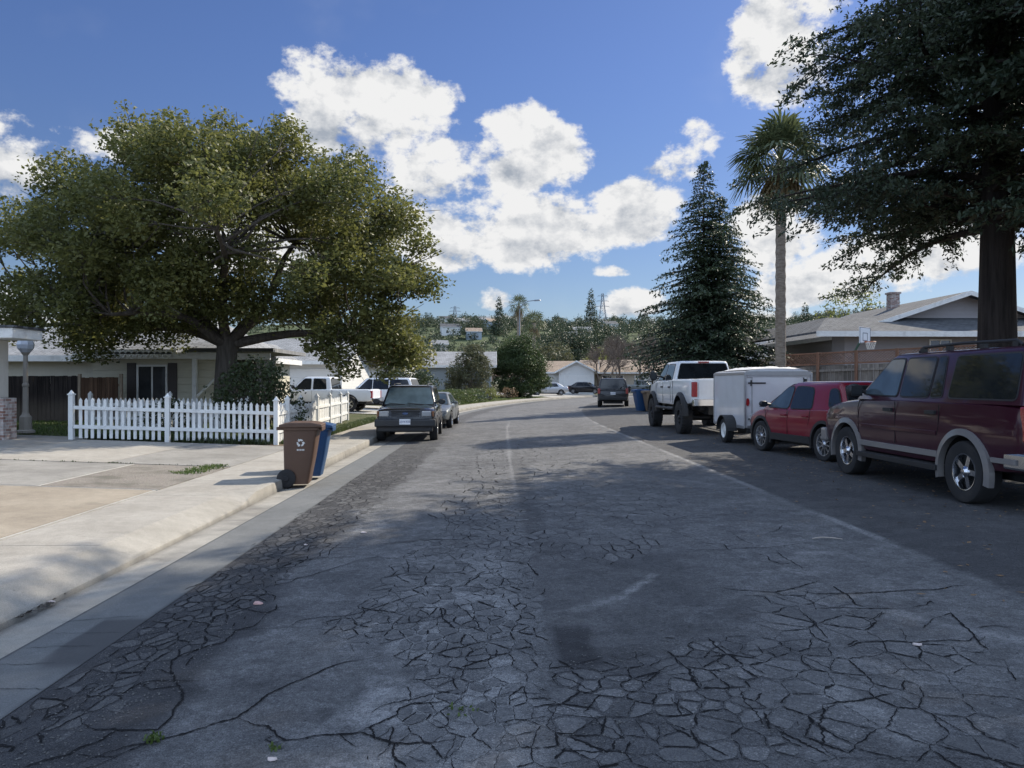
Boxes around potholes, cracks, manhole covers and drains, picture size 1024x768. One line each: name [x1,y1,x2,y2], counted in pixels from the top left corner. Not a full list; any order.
crack [0,436,1024,768]
